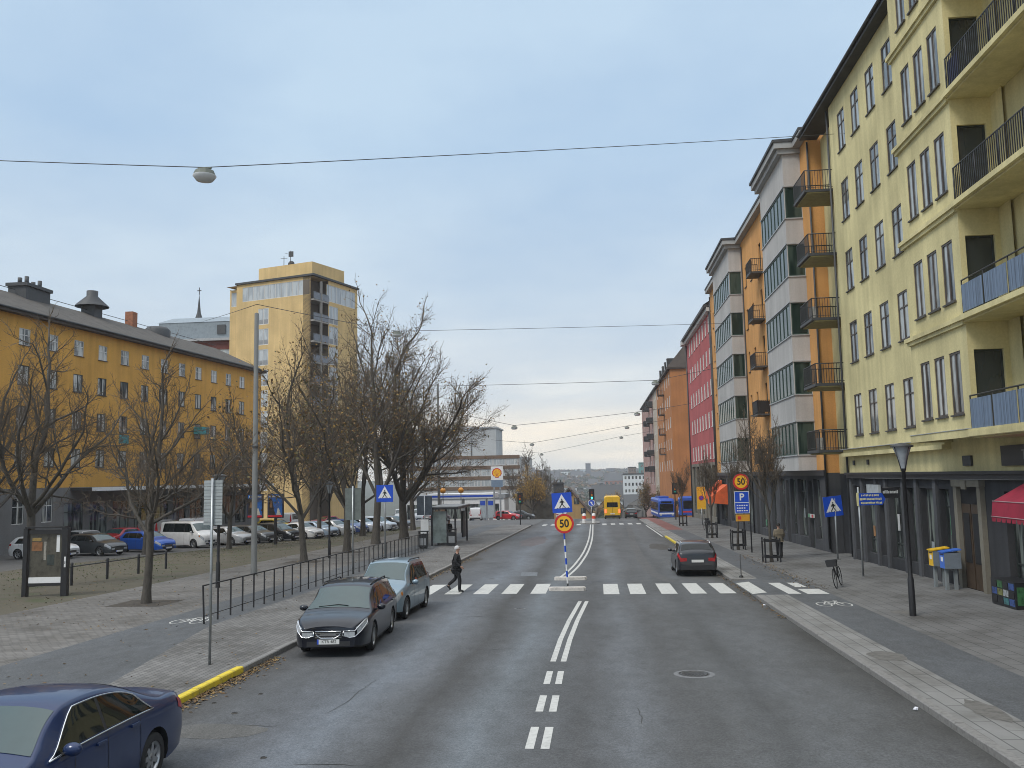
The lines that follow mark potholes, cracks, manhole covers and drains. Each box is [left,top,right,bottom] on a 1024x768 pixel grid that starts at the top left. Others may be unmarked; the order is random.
manhole cover [674,670,715,678]
